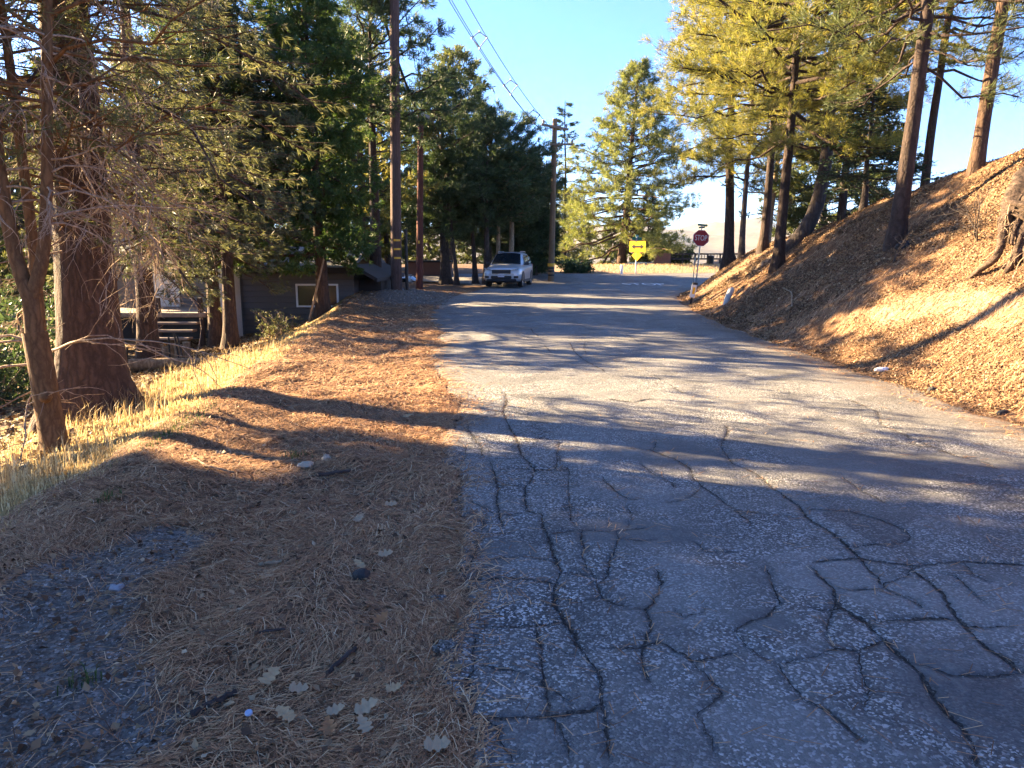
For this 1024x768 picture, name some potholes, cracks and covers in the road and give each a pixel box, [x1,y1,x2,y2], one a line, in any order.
crack [457,393,1024,766]
